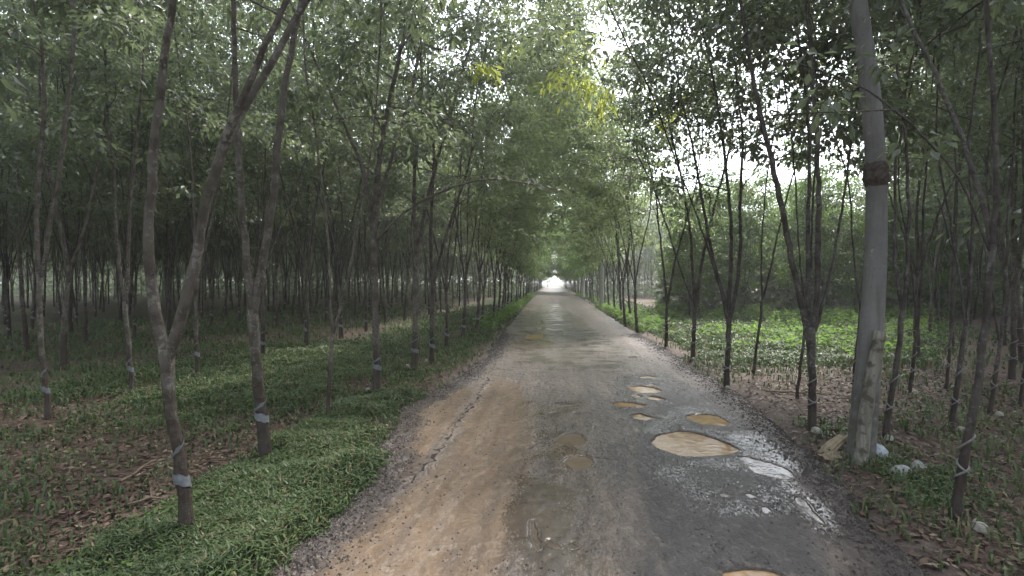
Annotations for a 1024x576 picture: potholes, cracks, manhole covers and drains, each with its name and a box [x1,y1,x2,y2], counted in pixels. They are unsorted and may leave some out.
pothole [734,455,799,482]
pothole [647,430,744,458]
pothole [623,385,668,394]
pothole [629,413,664,422]
pothole [682,413,733,427]
pothole [552,432,590,448]
pothole [560,455,597,473]
pothole [716,565,789,576]
crack [438,403,472,441]
